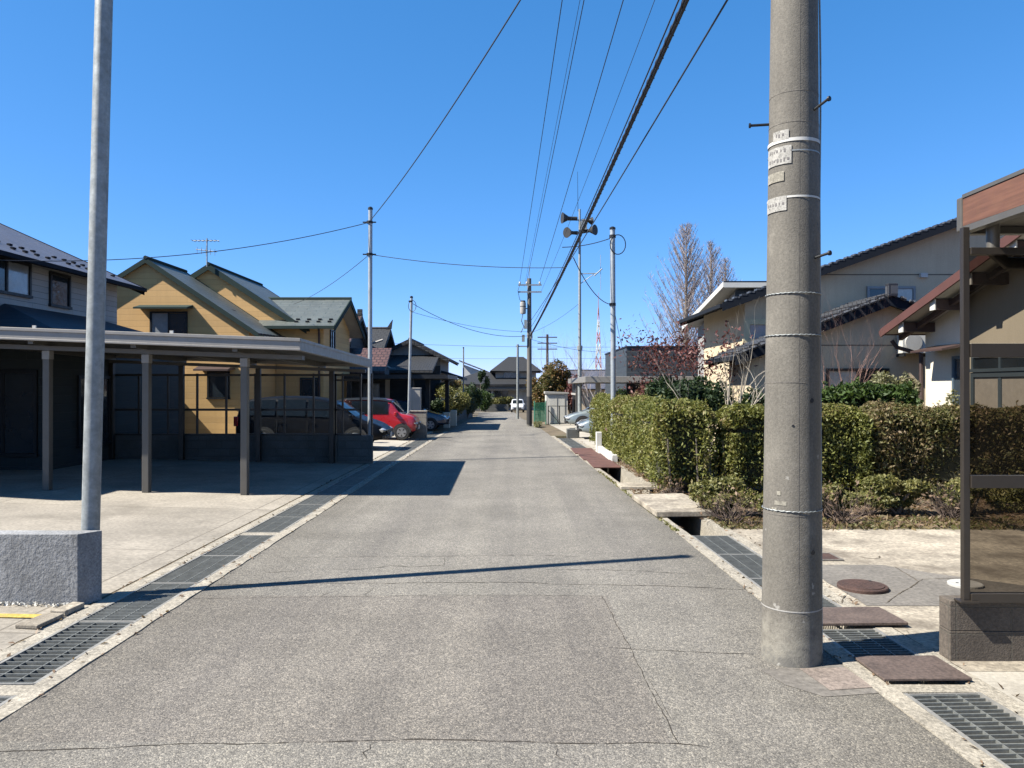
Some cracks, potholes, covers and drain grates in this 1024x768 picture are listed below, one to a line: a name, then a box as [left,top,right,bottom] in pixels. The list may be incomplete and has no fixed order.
drain grate [202,535,275,556]
drain grate [903,692,1024,768]
drain grate [823,628,919,657]
manhole cover [822,552,844,561]
drain grate [78,583,198,621]
drain grate [691,535,758,554]
drain grate [297,494,342,505]
drain grate [243,517,305,533]
drain grate [0,621,137,685]
manhole cover [837,579,889,595]
drain grate [716,554,762,578]
